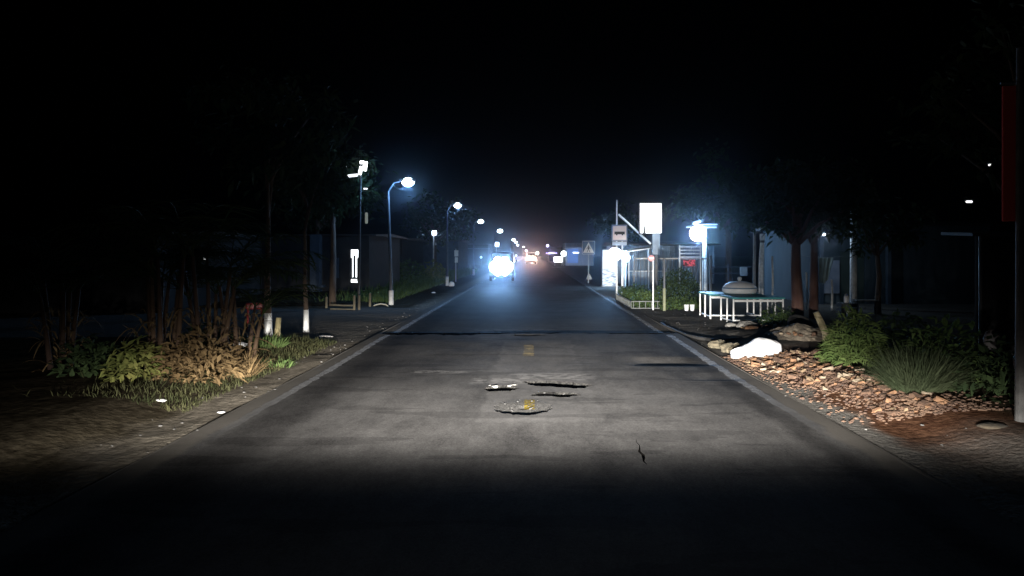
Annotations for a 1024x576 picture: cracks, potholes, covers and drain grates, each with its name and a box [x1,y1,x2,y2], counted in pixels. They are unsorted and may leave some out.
pothole [494,399,553,415]
pothole [524,380,594,388]
